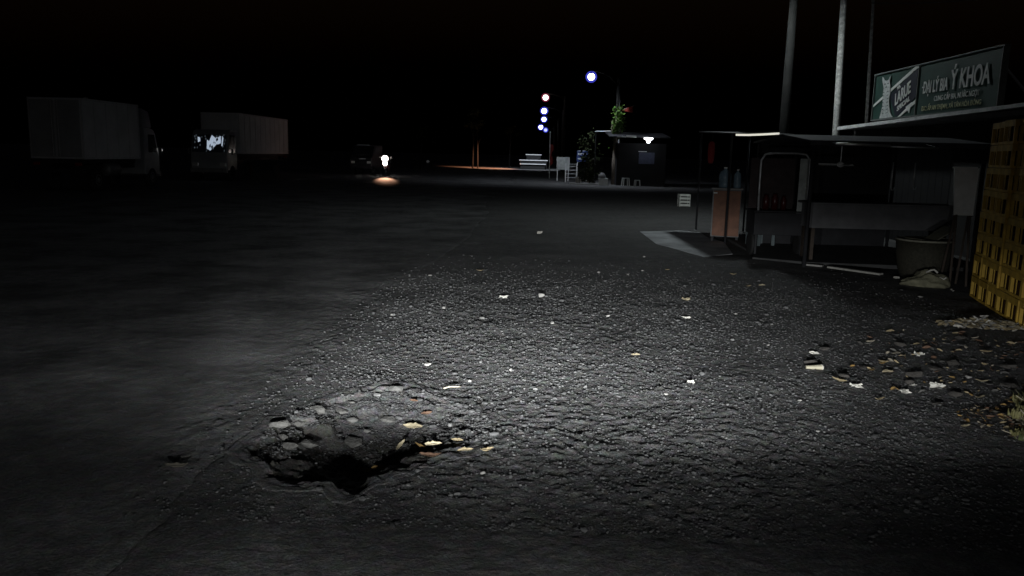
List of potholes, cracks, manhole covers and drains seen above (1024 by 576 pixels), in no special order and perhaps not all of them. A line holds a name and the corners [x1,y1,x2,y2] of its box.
pothole [226,380,499,505]
